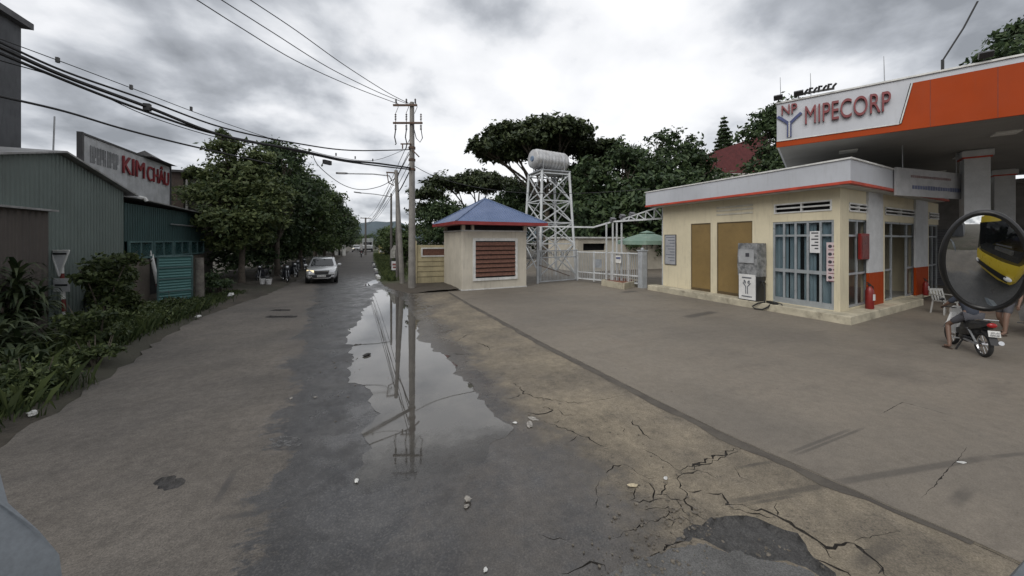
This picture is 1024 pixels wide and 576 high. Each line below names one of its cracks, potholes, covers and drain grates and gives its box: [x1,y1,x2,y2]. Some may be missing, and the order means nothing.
pothole [670,515,836,576]
crack [595,448,898,576]
crack [517,494,614,574]
crack [507,383,624,447]
